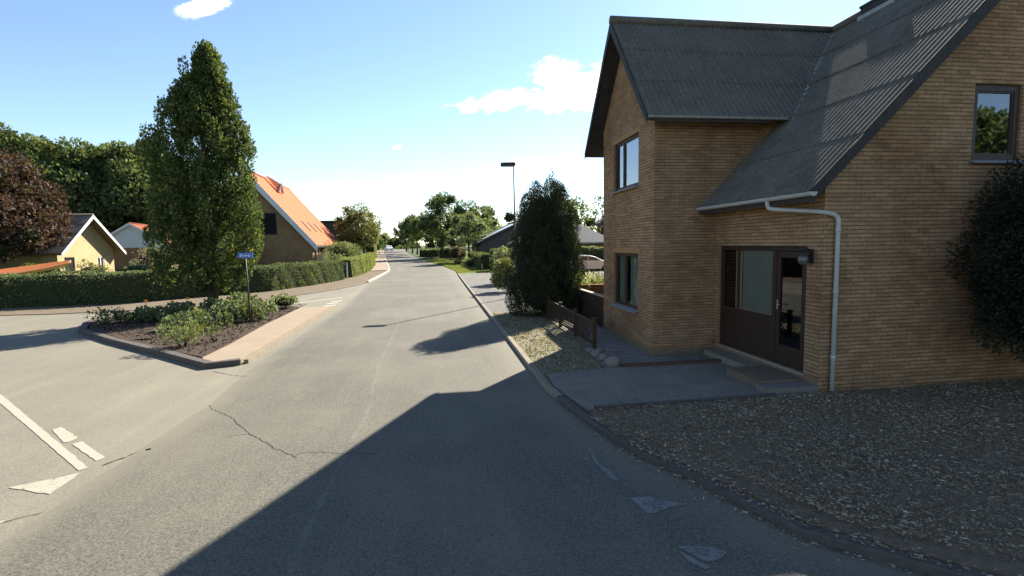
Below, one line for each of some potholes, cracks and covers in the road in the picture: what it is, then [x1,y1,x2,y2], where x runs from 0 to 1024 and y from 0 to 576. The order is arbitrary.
crack [209,405,369,457]
